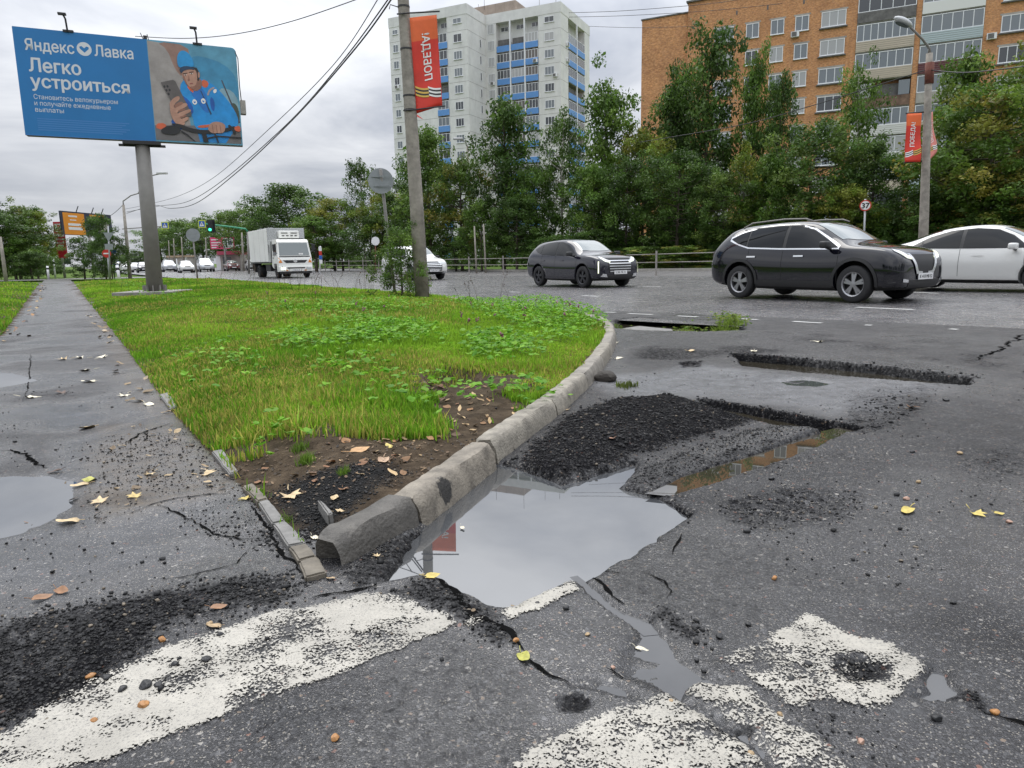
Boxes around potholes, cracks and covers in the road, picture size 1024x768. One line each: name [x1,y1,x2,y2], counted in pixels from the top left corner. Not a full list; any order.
pothole [555,693,596,714]
pothole [696,398,867,432]
pothole [731,353,975,385]
crack [435,577,571,684]
pothole [828,653,898,687]
crack [135,493,302,588]
crack [3,450,48,468]
pothole [369,455,700,609]
pothole [578,583,657,628]
pothole [652,428,844,496]
